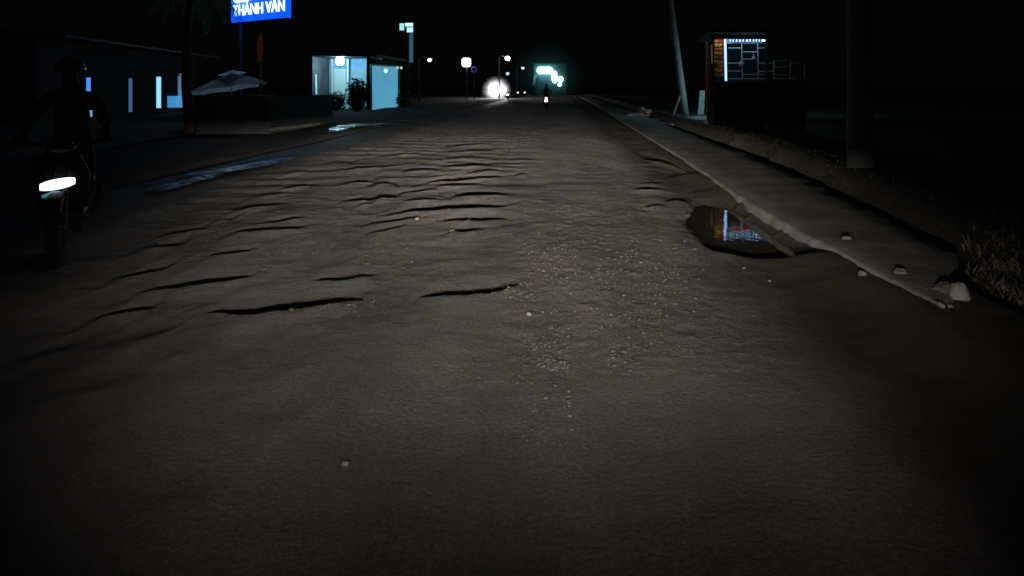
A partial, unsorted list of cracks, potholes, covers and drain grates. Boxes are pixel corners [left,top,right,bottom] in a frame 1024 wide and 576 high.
pothole [676,195,822,255]
